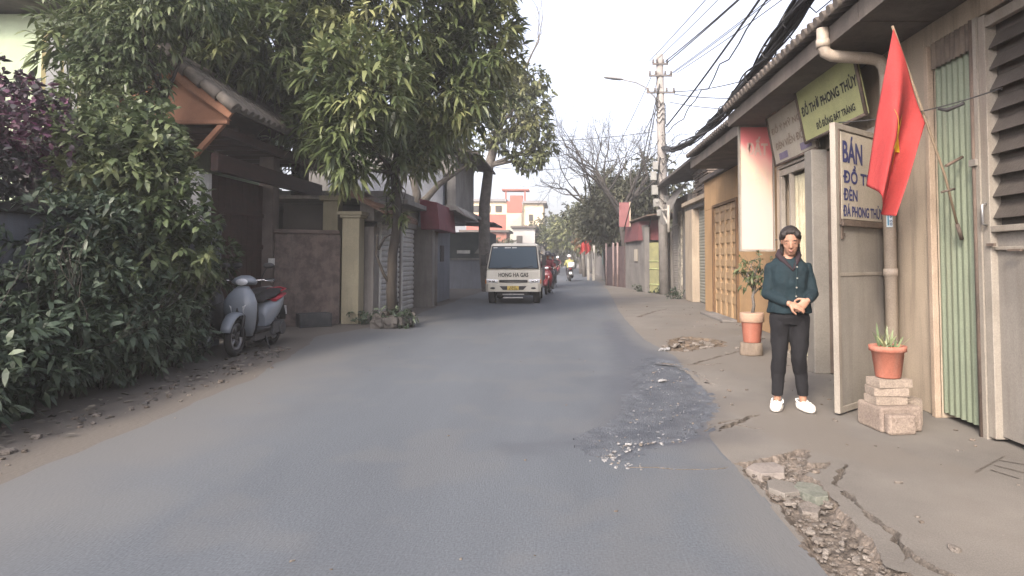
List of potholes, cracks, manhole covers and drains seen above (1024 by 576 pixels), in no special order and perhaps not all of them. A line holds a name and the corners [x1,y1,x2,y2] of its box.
pothole [653,336,732,353]
pothole [721,446,925,576]
crack [655,350,739,392]
crack [694,413,775,436]
crack [820,460,976,576]
